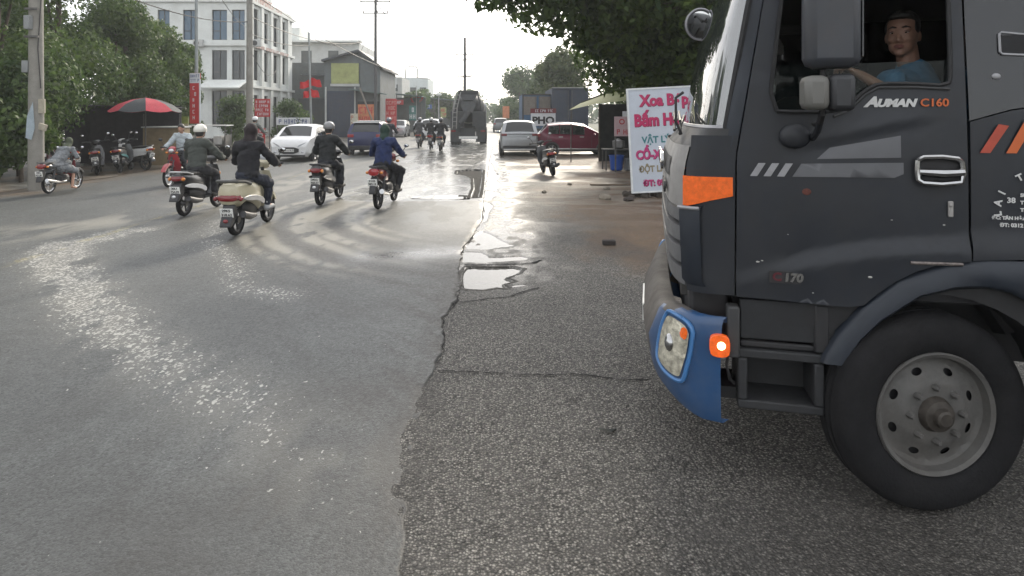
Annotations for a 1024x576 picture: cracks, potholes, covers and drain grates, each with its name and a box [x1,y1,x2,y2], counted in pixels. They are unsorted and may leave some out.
pothole [458,266,527,291]
pothole [454,169,485,198]
crack [437,201,648,380]
